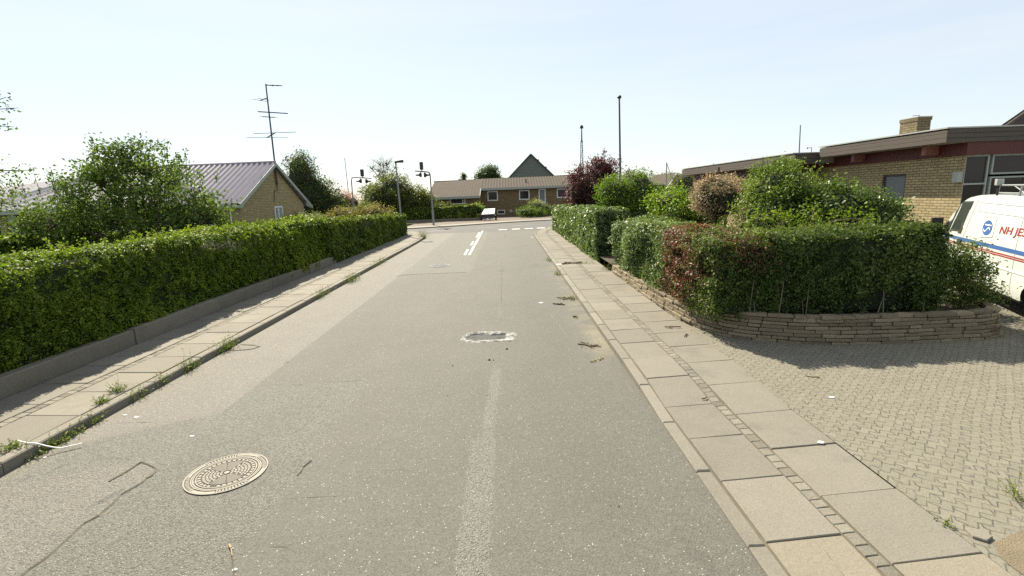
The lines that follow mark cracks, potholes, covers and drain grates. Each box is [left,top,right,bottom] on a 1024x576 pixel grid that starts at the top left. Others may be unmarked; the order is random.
manhole cover [182,453,268,496]
pothole [460,331,517,343]
